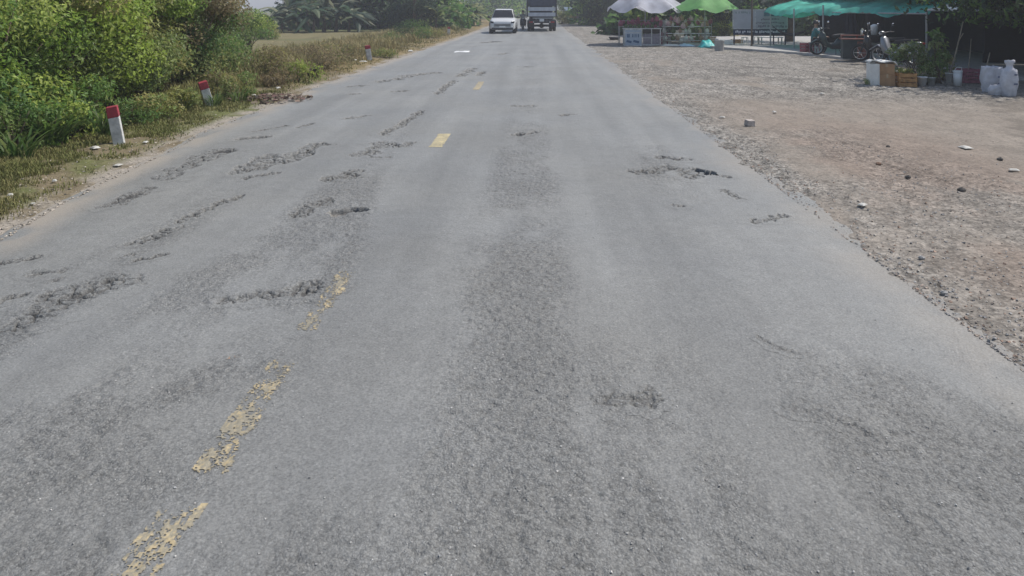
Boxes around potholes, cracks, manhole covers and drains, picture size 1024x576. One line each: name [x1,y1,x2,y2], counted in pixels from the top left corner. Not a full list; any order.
pothole [202,275,357,310]
pothole [316,204,377,220]
crack [770,399,902,451]
pothole [690,166,723,177]
pothole [221,148,322,178]
pothole [736,211,798,226]
crack [747,330,811,358]
